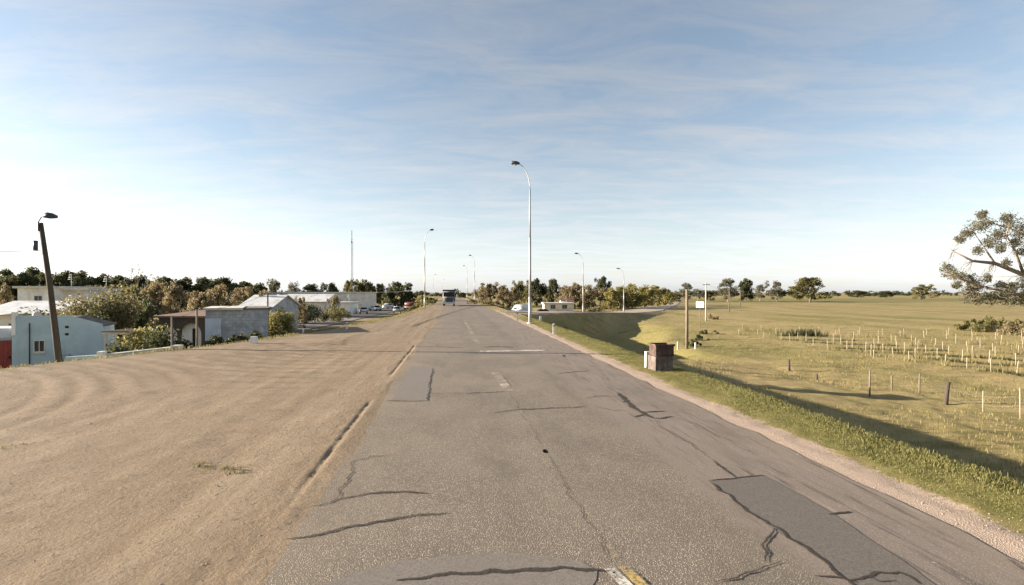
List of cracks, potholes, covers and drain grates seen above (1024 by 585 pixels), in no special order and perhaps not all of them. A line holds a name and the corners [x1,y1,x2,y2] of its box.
crack [396,391,920,585]
crack [287,454,448,539]
